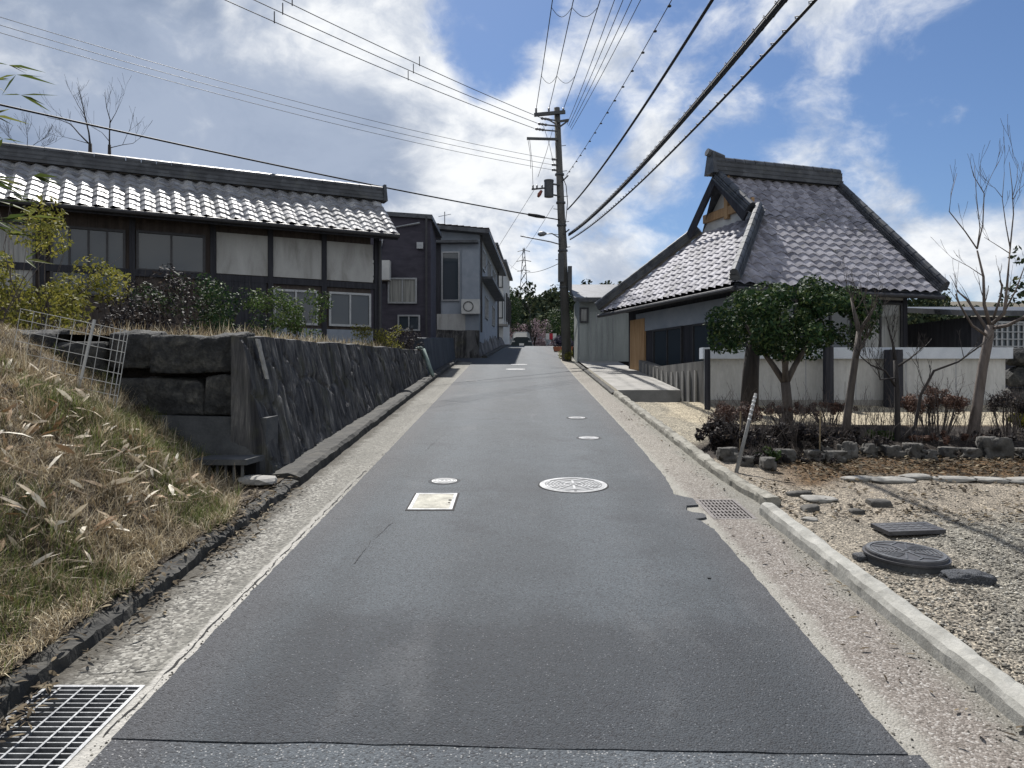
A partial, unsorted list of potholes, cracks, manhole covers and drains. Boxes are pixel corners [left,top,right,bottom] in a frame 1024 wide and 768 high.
manhole cover [405,493,460,511]
manhole cover [538,477,609,493]
manhole cover [870,521,946,536]
manhole cover [862,541,952,575]
drain grate [0,685,146,768]
drain grate [695,499,757,519]
